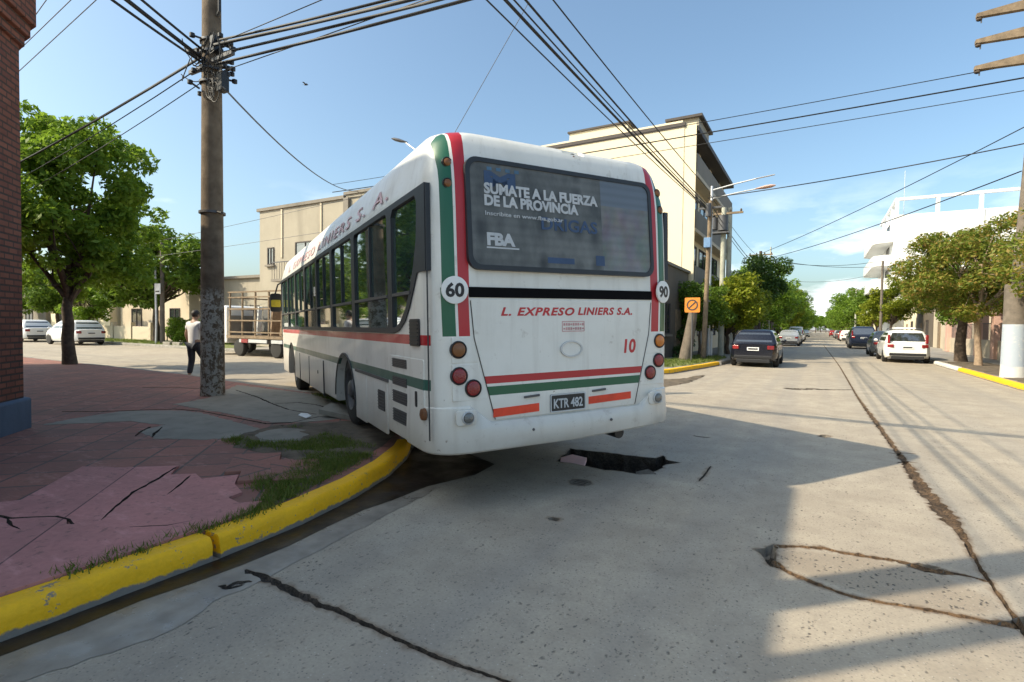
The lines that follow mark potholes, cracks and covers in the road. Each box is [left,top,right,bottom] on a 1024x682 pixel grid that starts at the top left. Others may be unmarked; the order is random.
pothole [558,448,680,474]
crack [771,347,1024,636]
crack [0,515,74,529]
crack [218,569,511,682]
crack [101,467,191,527]
